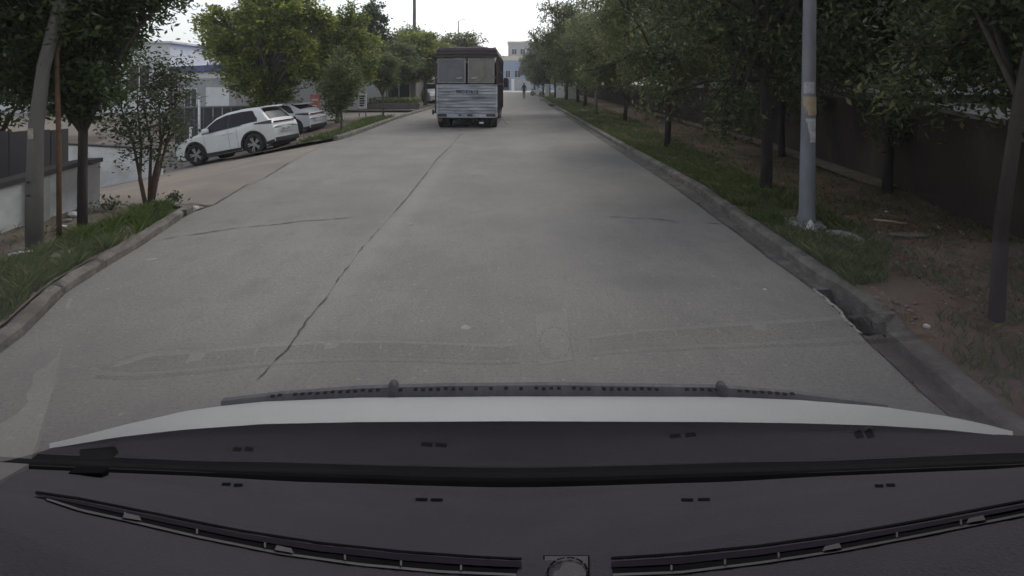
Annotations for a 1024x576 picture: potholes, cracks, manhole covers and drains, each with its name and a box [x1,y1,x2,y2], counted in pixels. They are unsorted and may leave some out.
drain grate [813,288,886,358]
crack [154,215,374,241]
